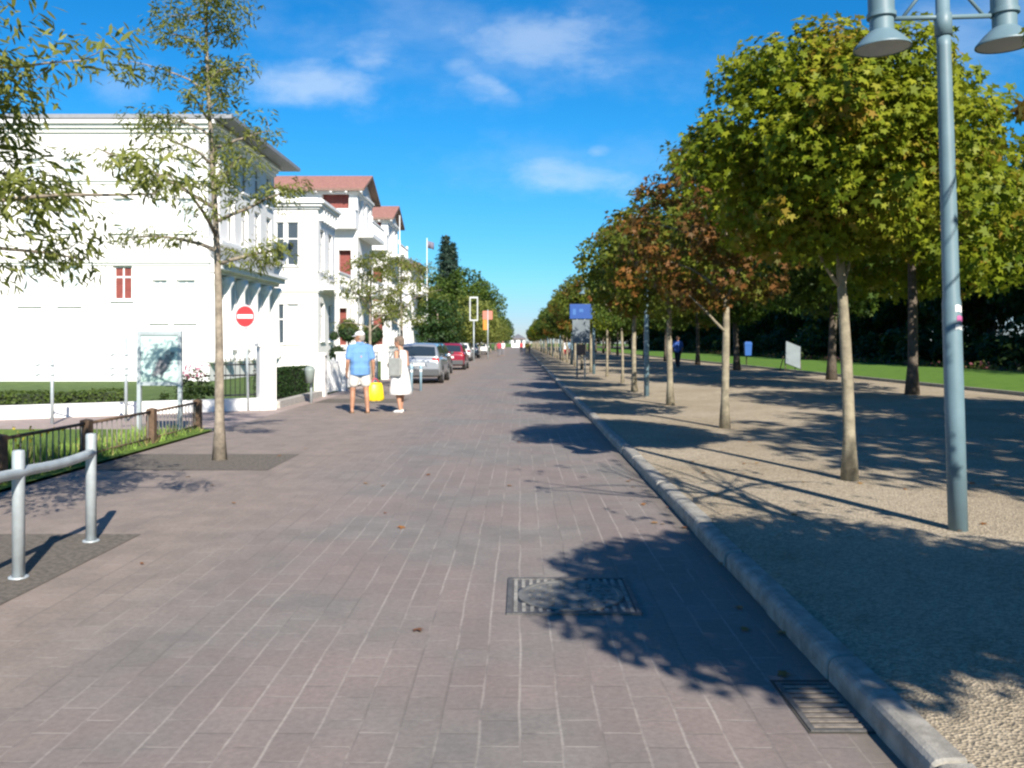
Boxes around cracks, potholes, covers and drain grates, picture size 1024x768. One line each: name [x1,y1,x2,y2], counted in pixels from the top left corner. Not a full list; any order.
manhole cover [506,577,643,615]
drain grate [770,680,876,734]
